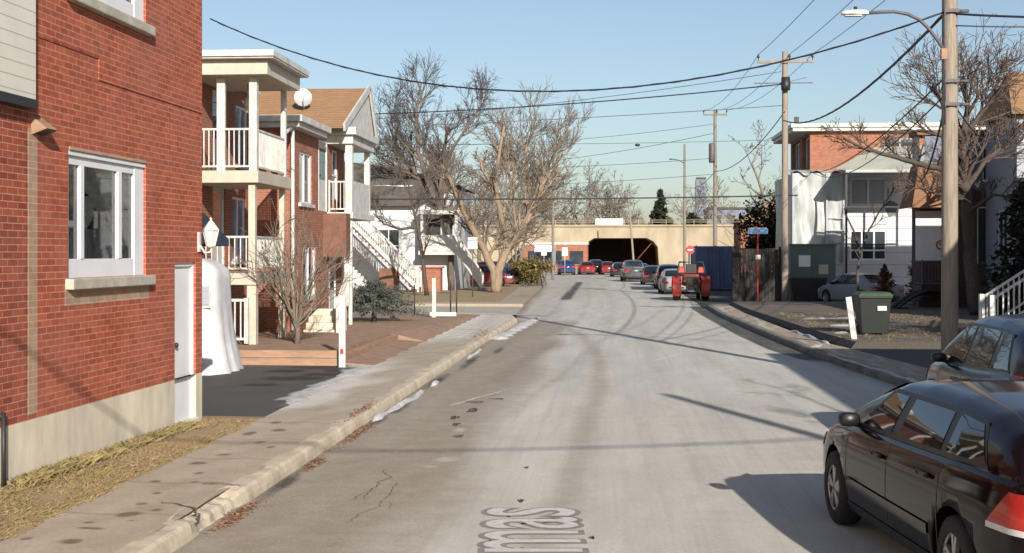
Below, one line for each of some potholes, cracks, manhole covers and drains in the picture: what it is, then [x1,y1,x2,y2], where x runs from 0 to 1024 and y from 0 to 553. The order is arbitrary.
crack [348,469,398,522]
